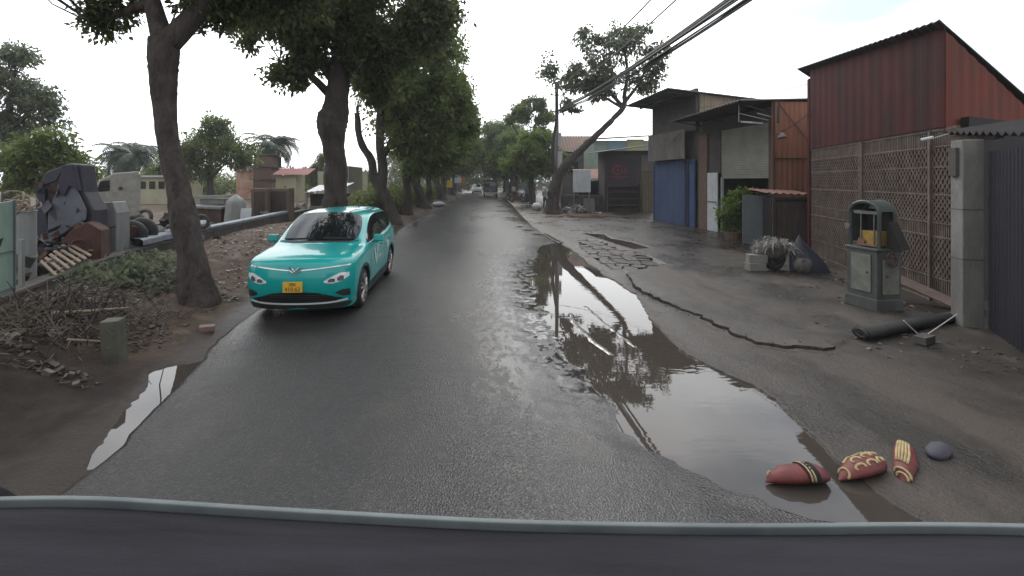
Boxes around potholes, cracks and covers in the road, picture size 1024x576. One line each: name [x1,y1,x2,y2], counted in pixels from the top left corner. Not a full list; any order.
crack [542,233,845,354]
